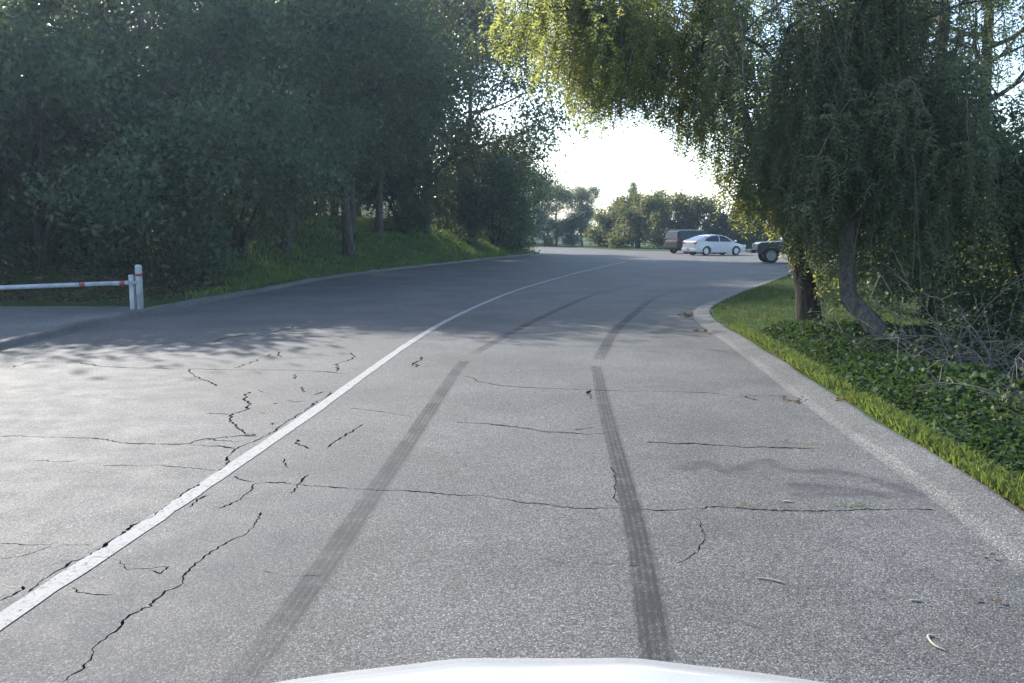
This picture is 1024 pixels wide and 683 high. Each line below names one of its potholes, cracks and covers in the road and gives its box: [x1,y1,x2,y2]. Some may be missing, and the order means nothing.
crack [0,352,932,682]
